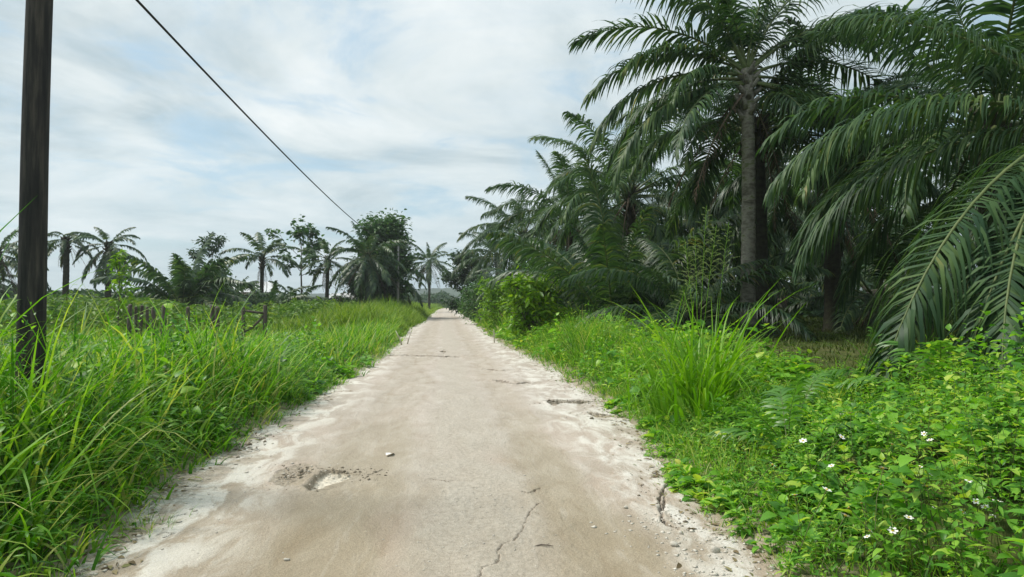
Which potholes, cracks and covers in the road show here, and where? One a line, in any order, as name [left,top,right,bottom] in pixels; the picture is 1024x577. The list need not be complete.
crack [479,489,539,577]
pothole [268,463,313,487]
crack [658,485,674,528]
crack [488,369,533,384]
pothole [304,469,359,491]
